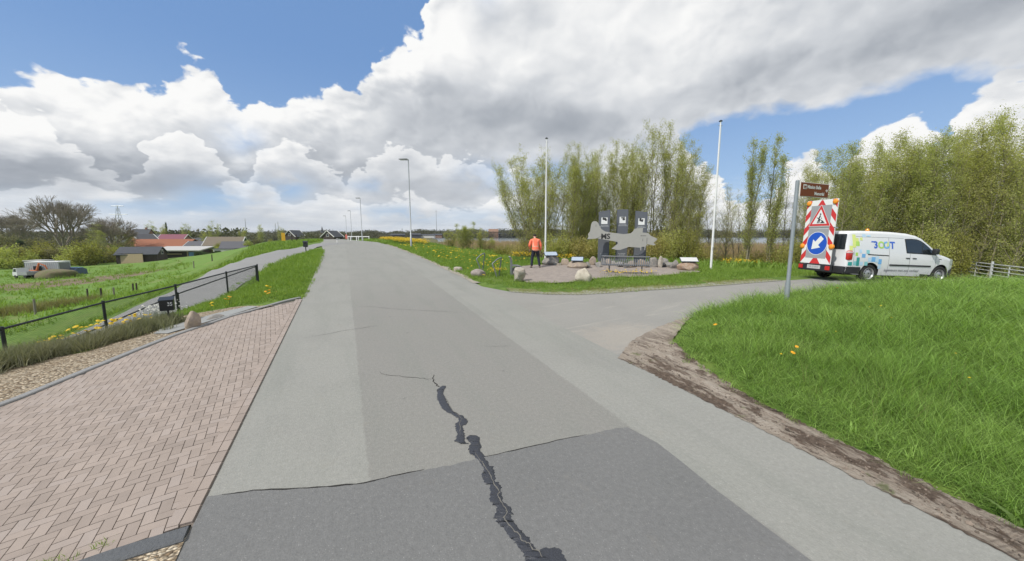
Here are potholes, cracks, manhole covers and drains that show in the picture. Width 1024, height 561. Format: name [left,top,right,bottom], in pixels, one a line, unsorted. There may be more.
crack [380,372,566,561]
